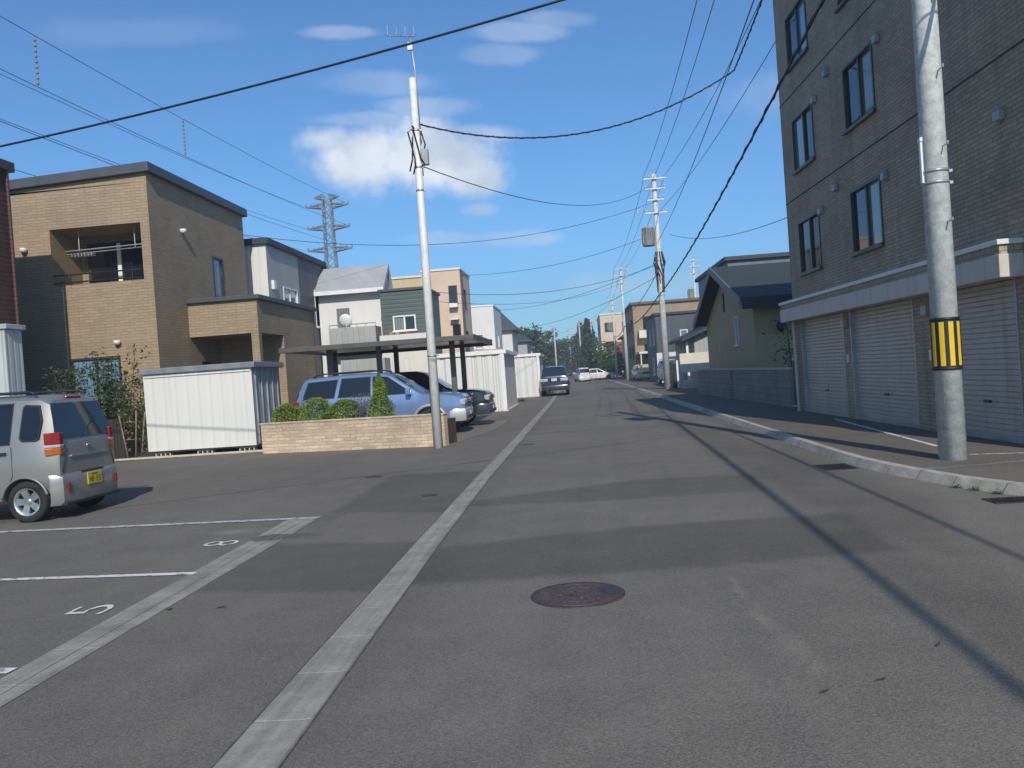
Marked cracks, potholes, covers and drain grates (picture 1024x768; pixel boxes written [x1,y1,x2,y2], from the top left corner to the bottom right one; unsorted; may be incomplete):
drain grate [813,463,859,471]
manhole cover [531,582,625,608]
drain grate [981,496,1024,504]
